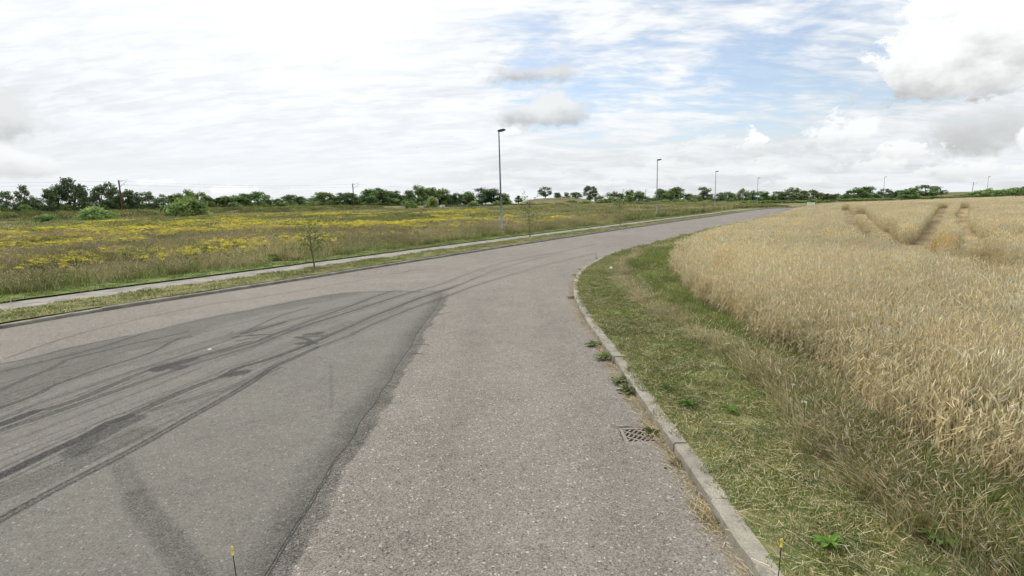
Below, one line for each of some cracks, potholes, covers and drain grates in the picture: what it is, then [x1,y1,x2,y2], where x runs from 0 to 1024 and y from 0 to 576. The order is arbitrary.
drain grate [619,427,661,443]
